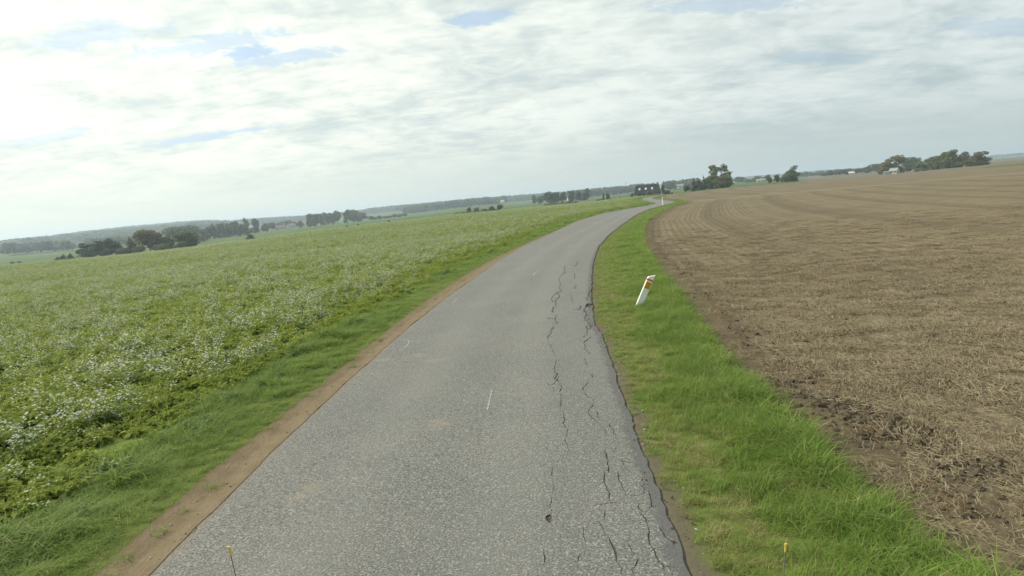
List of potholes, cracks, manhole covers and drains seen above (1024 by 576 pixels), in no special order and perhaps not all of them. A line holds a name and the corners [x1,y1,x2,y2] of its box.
crack [546,265,674,573]
